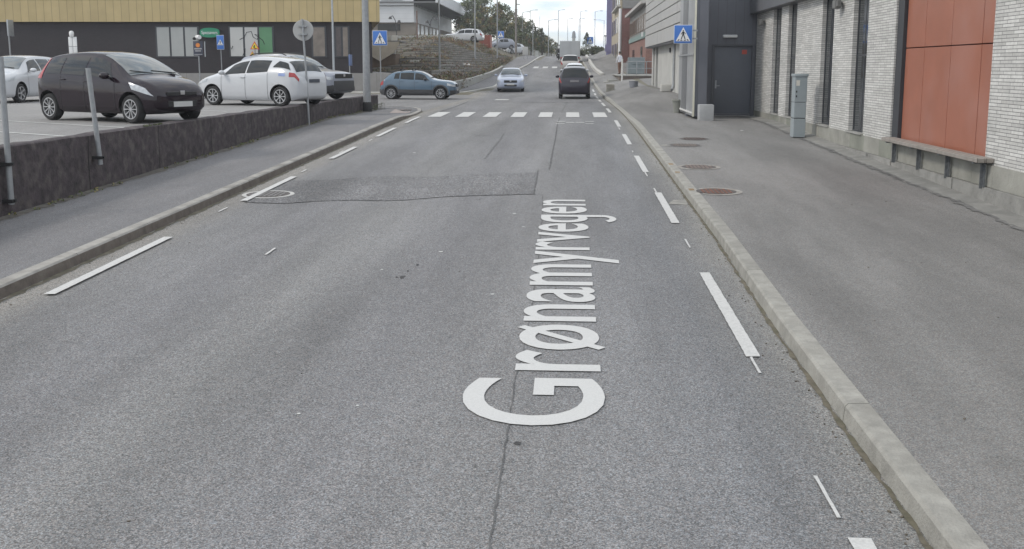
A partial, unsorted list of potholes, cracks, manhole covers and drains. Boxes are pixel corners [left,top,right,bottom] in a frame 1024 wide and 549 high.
manhole cover [242,190,295,198]
